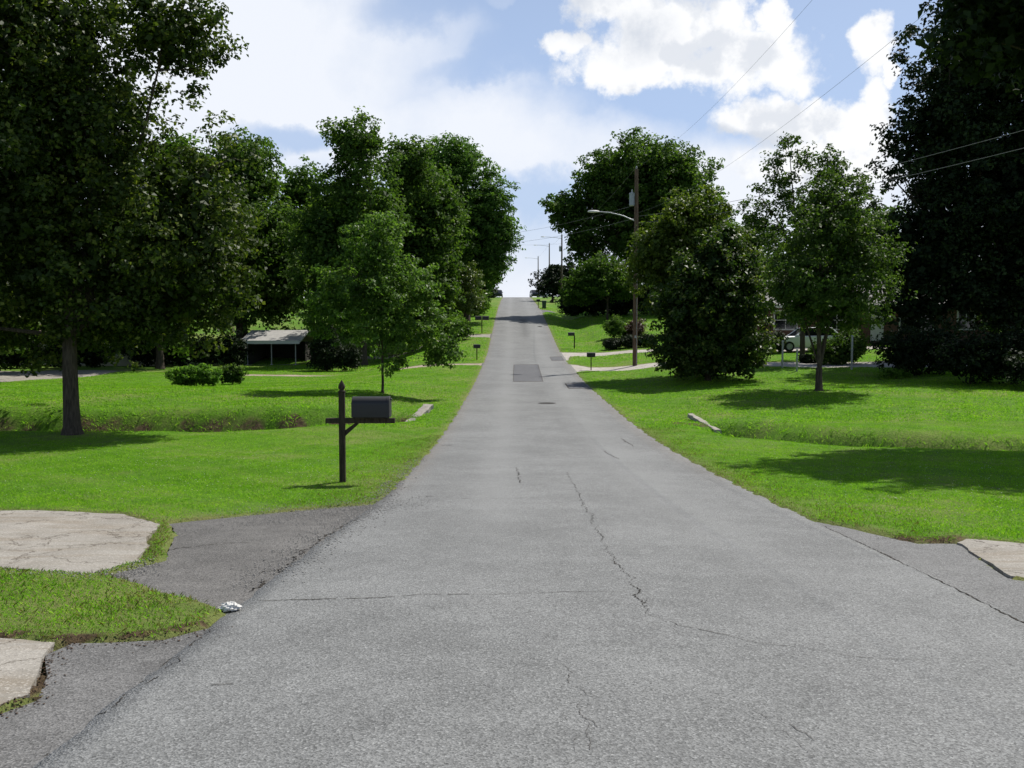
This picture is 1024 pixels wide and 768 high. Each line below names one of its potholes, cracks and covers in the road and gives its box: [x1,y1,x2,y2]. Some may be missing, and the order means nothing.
crack [567,472,658,617]
crack [561,663,600,749]
